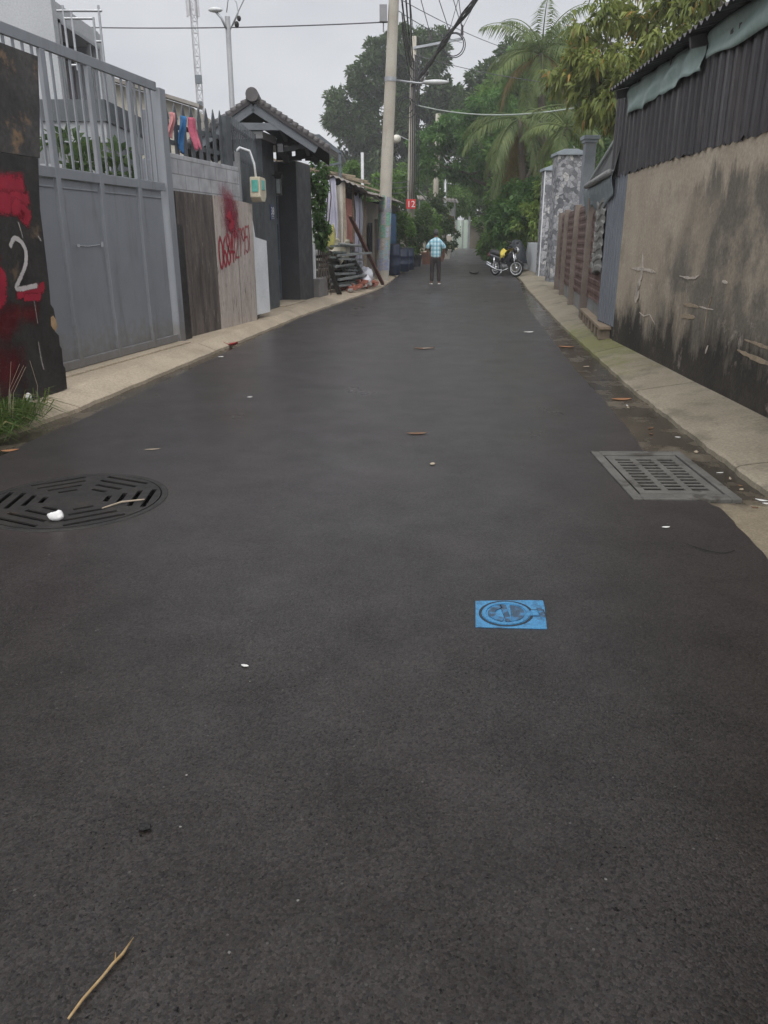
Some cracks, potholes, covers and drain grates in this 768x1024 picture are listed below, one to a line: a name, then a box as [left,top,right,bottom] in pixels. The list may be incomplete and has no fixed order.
manhole cover [0,473,168,532]
drain grate [591,451,742,503]
